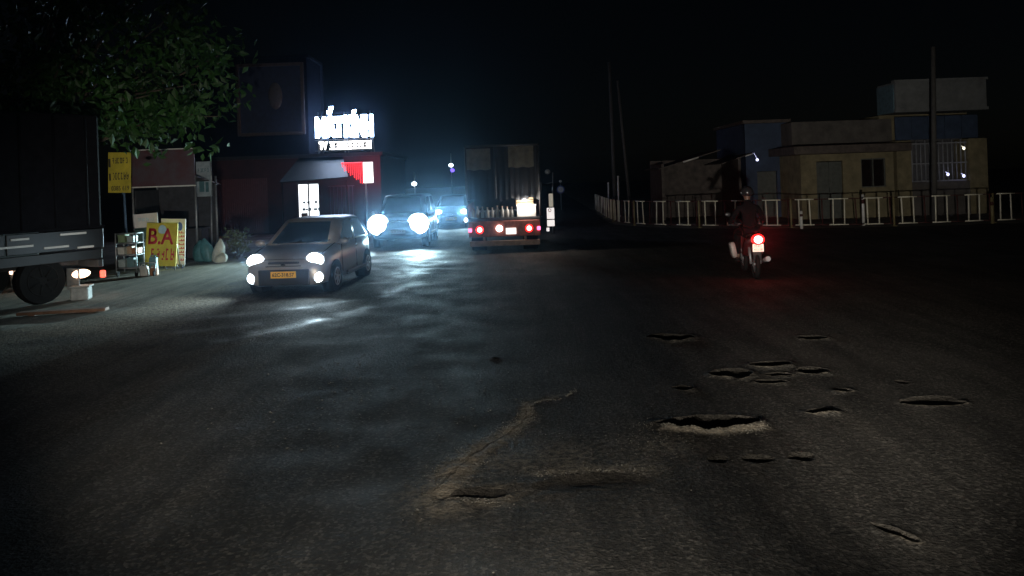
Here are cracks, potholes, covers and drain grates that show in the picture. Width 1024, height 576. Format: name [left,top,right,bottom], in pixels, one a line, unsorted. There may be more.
pothole [651,414,762,429]
pothole [646,333,697,341]
pothole [708,368,753,378]
pothole [898,395,967,406]
pothole [787,452,816,462]
pothole [796,366,829,374]
pothole [741,454,776,463]
pothole [449,487,509,498]
pothole [707,454,730,463]
crack [433,392,574,491]
pothole [870,522,921,543]
